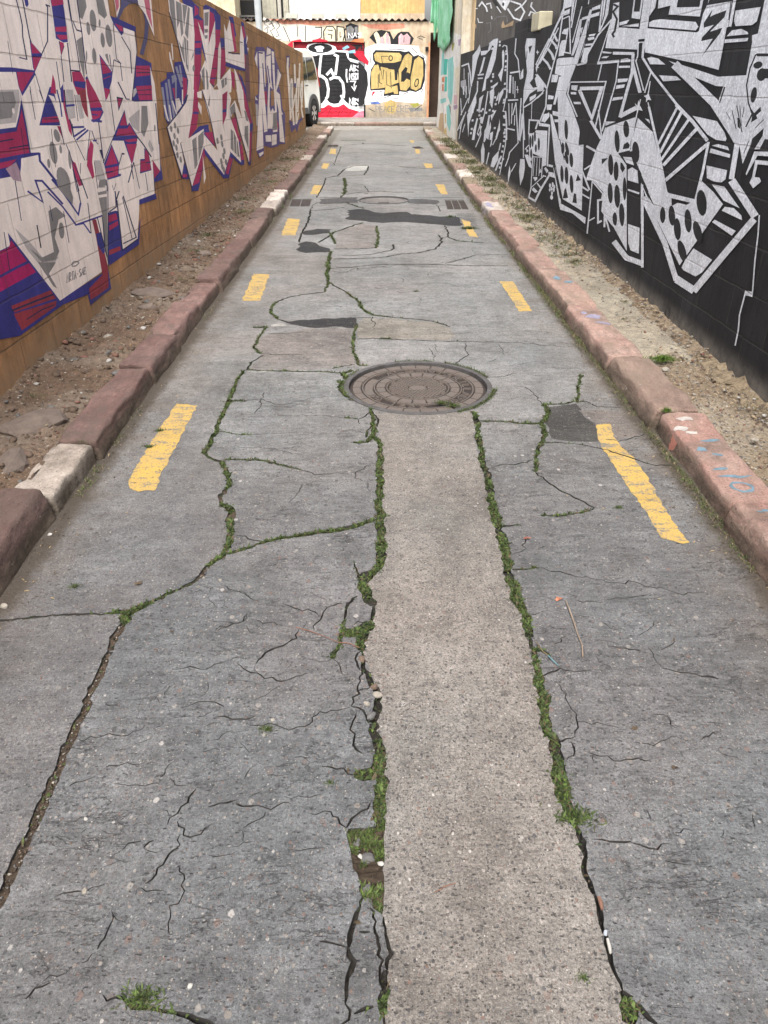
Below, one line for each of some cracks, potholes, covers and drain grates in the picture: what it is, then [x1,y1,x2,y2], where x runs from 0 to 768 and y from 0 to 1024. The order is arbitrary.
crack [472,375,758,1024]
drain grate [444,200,470,210]
crack [320,886,394,1024]
drain grate [289,199,312,207]
manhole cover [344,361,493,415]
crack [25,411,390,999]
manhole cover [358,196,410,204]
